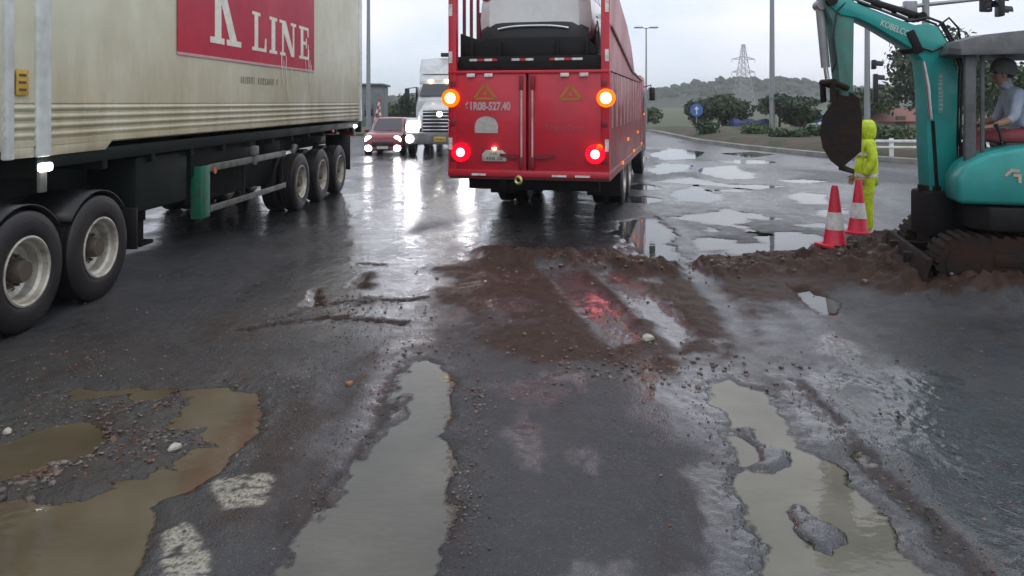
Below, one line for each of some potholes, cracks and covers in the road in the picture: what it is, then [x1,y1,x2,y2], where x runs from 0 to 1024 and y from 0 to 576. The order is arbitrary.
pothole [694,371,961,576]
crack [231,296,428,332]
pothole [784,283,850,317]
pothole [0,381,277,576]
pothole [256,354,475,576]
